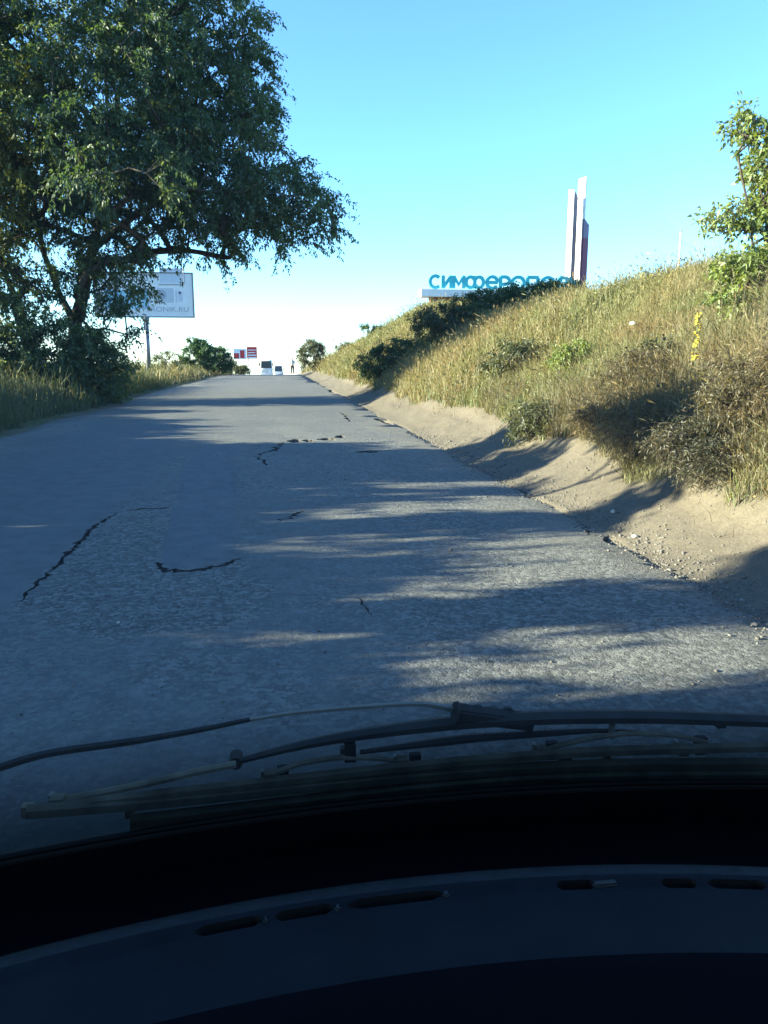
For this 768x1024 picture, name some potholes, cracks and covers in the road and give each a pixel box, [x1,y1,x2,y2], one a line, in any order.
crack [19,507,168,602]
crack [254,443,286,465]
crack [154,559,239,573]
